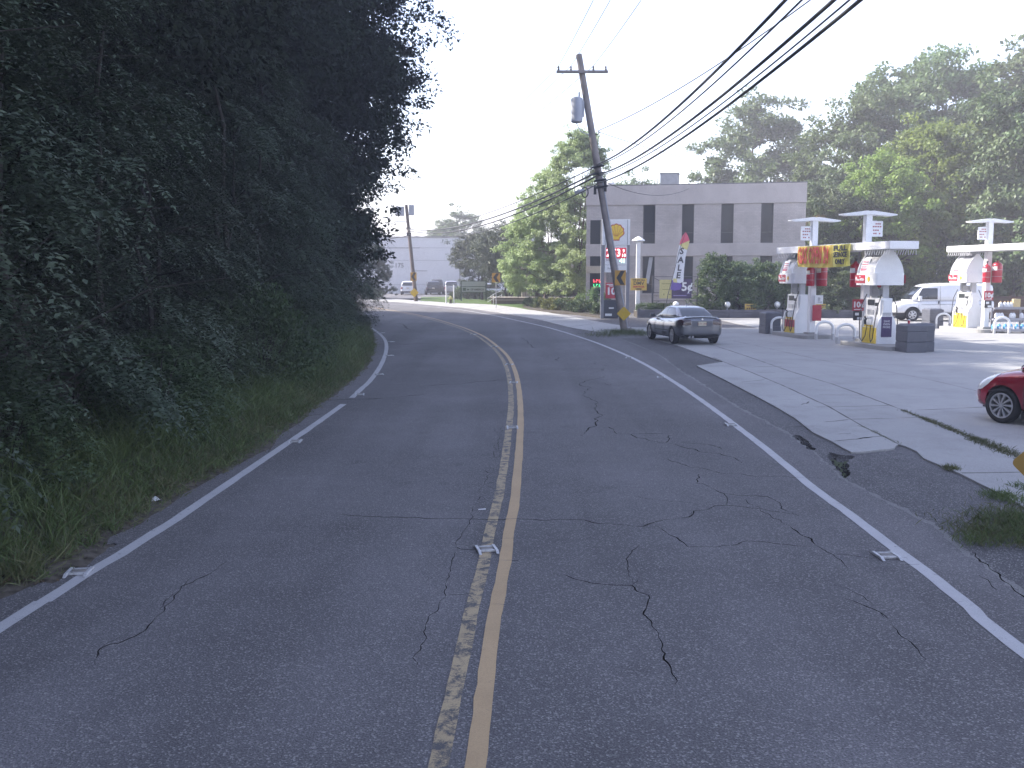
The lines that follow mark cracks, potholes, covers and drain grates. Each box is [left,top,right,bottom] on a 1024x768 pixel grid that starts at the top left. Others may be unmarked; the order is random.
pothole [792,435,816,450]
crack [94,563,224,663]
crack [961,547,1024,597]
crack [579,363,841,480]
crack [342,427,871,667]
crack [836,585,926,659]
pothole [827,452,855,477]
